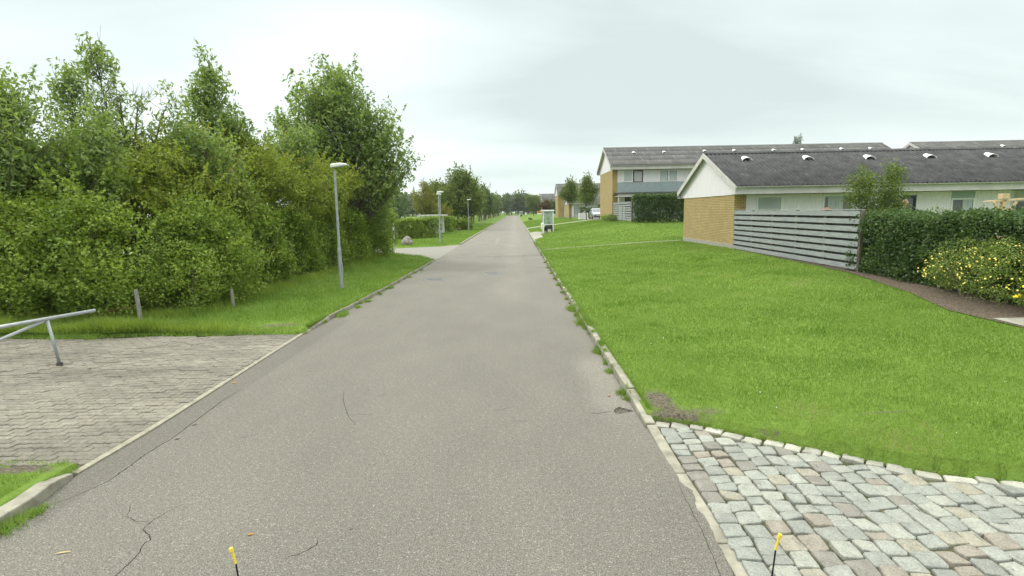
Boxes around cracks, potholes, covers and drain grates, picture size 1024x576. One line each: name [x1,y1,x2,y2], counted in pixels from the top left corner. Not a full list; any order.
crack [116,508,174,576]
